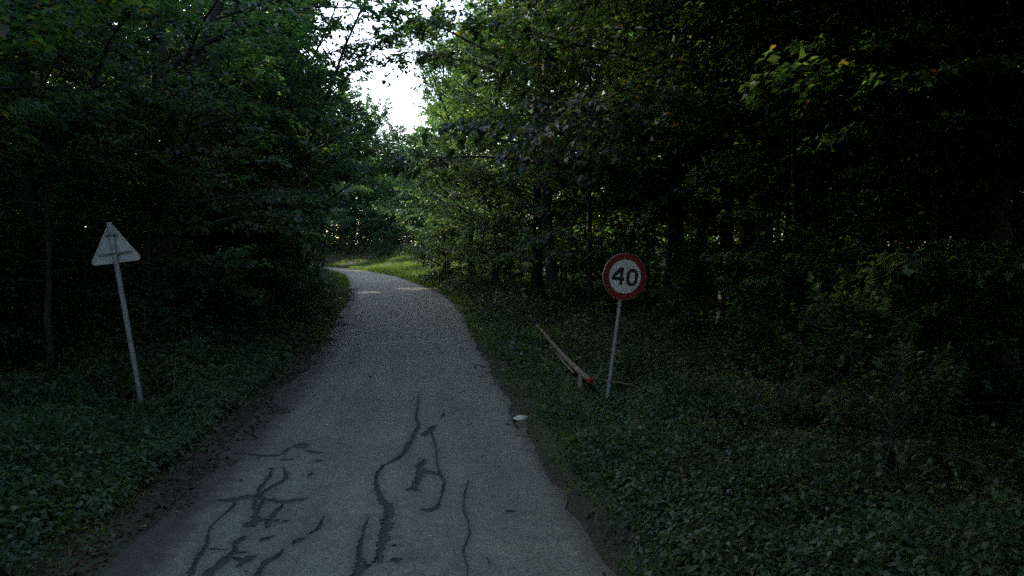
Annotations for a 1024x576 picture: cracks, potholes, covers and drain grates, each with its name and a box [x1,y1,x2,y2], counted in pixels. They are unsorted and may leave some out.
crack [185,443,325,576]
crack [349,391,490,576]
